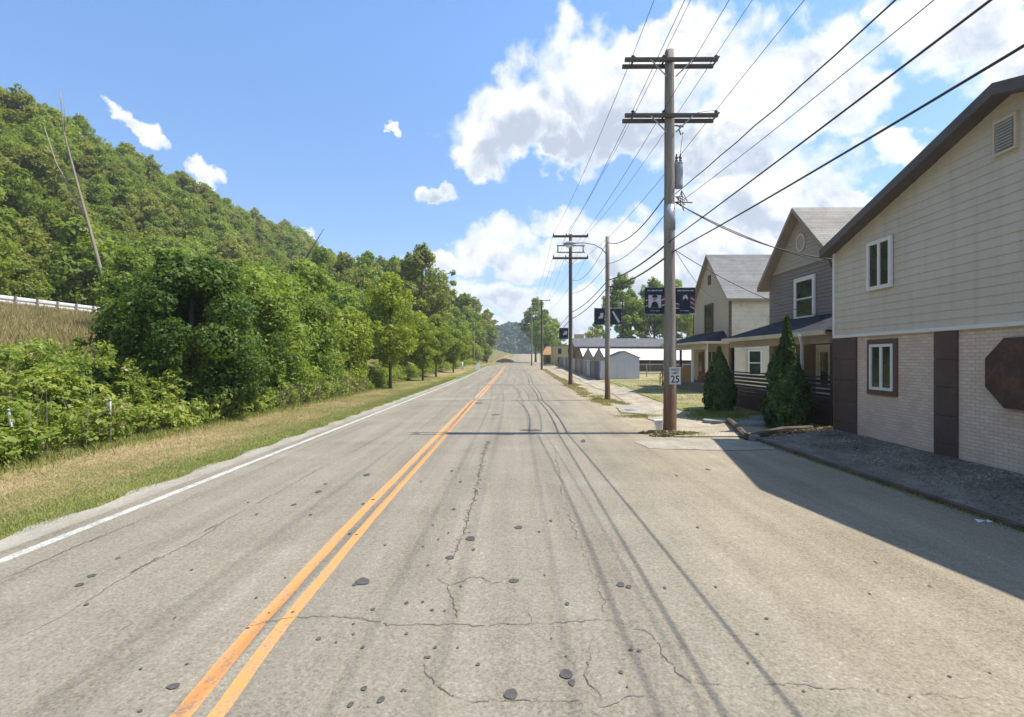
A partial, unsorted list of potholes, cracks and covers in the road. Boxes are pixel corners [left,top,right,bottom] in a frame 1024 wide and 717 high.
pothole [504,688,517,699]
crack [252,441,648,707]
